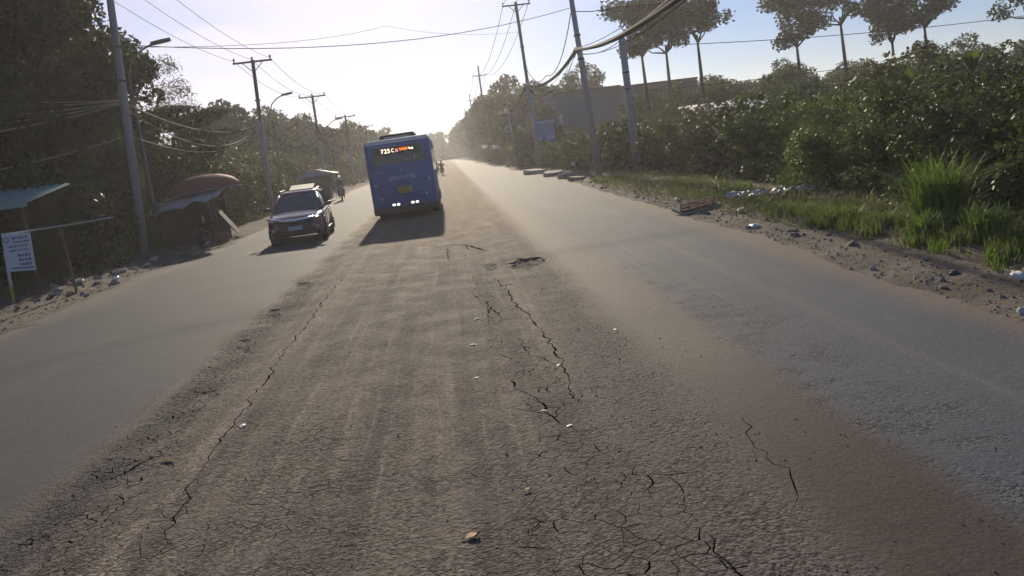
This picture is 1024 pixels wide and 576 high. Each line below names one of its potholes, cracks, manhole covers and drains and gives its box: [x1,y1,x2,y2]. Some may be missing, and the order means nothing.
pothole [508,257,546,270]
crack [741,416,799,503]
crack [1,282,510,576]
crack [473,276,747,576]
